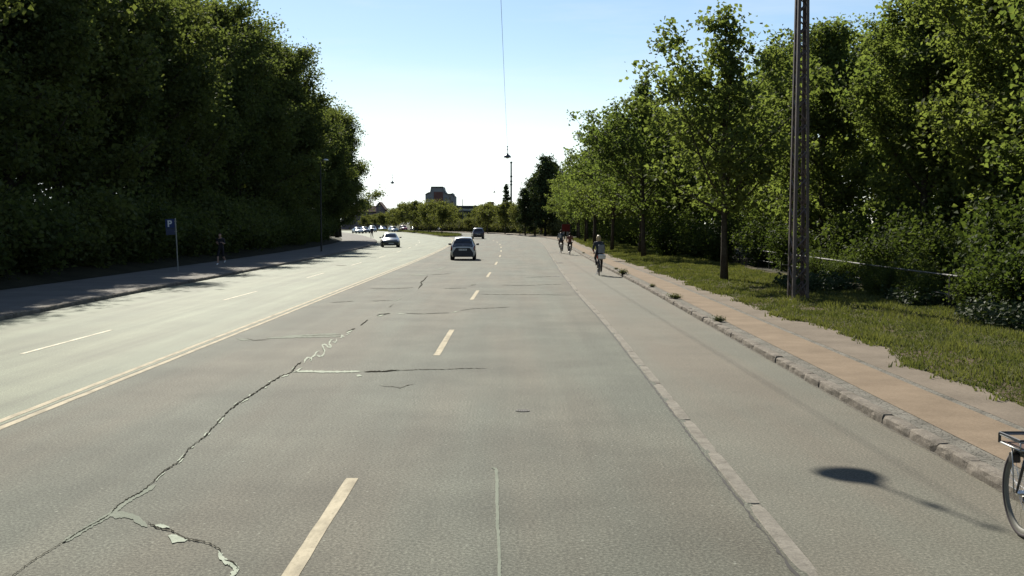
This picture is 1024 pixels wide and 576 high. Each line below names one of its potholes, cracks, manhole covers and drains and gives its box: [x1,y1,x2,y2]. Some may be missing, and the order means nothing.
crack [12,267,552,576]
